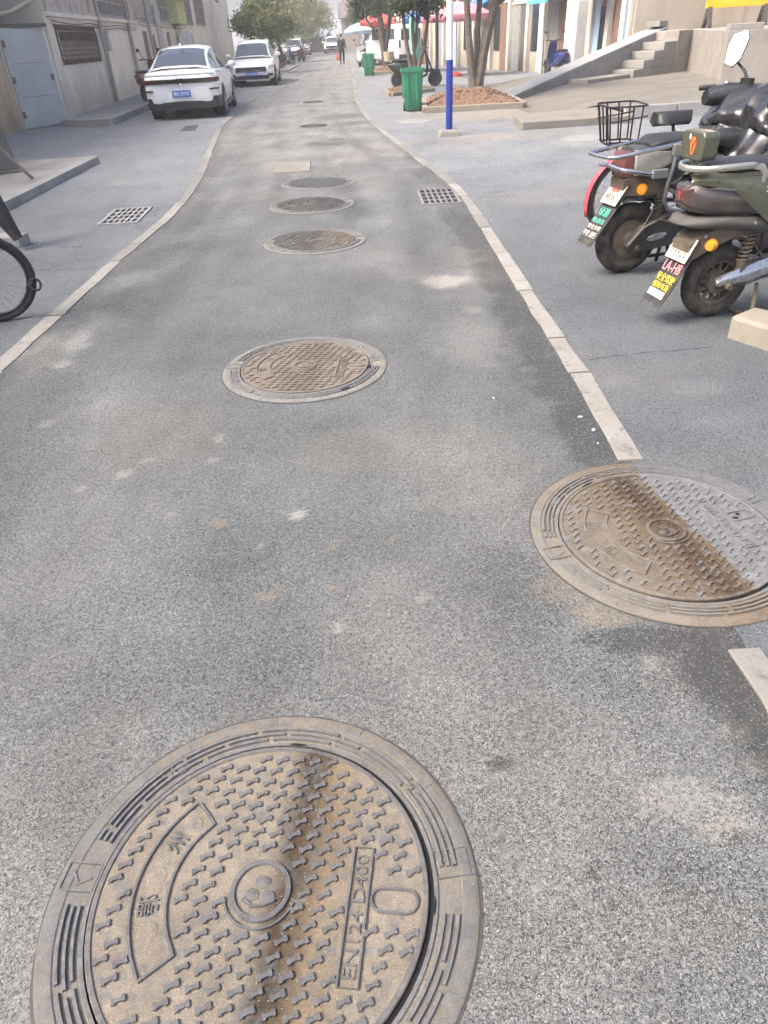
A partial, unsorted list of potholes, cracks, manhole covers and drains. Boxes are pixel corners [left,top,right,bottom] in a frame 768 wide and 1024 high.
drain grate [417,187,462,206]
drain grate [97,206,153,226]
manhole cover [262,228,367,255]
manhole cover [529,463,768,633]
crack [590,347,709,360]
manhole cover [222,337,388,404]
manhole cover [268,196,355,215]
manhole cover [280,176,356,191]
manhole cover [30,716,483,1024]
